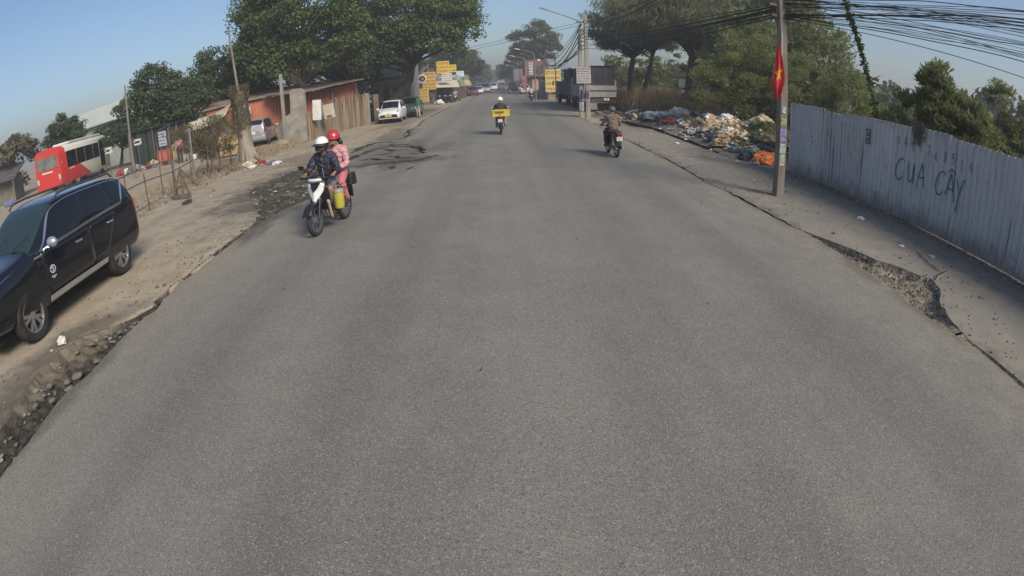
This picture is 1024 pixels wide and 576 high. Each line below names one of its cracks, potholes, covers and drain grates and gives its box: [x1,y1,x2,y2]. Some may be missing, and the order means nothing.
crack [916,252,952,280]
pothole [0,305,160,478]
pothole [801,230,961,336]
